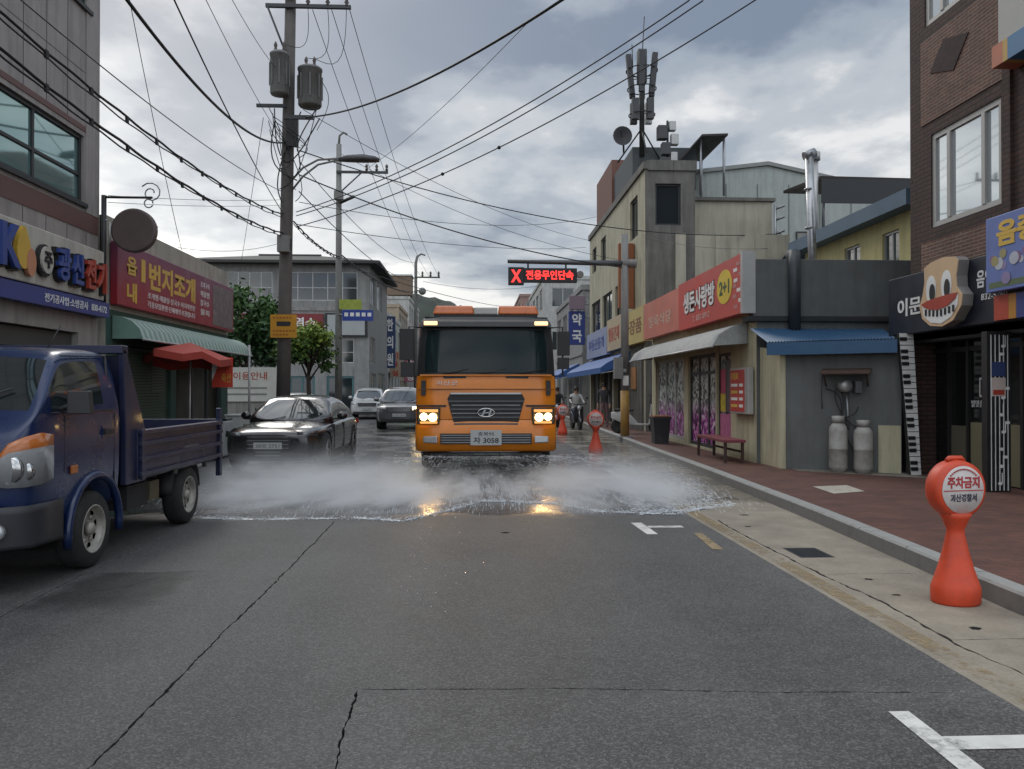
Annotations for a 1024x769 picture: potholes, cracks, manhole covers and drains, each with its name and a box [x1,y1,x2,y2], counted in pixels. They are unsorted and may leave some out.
crack [336,689,911,769]
drain grate [783,548,833,558]
crack [718,520,1022,674]
manhole cover [813,485,864,494]
crack [91,522,334,767]
